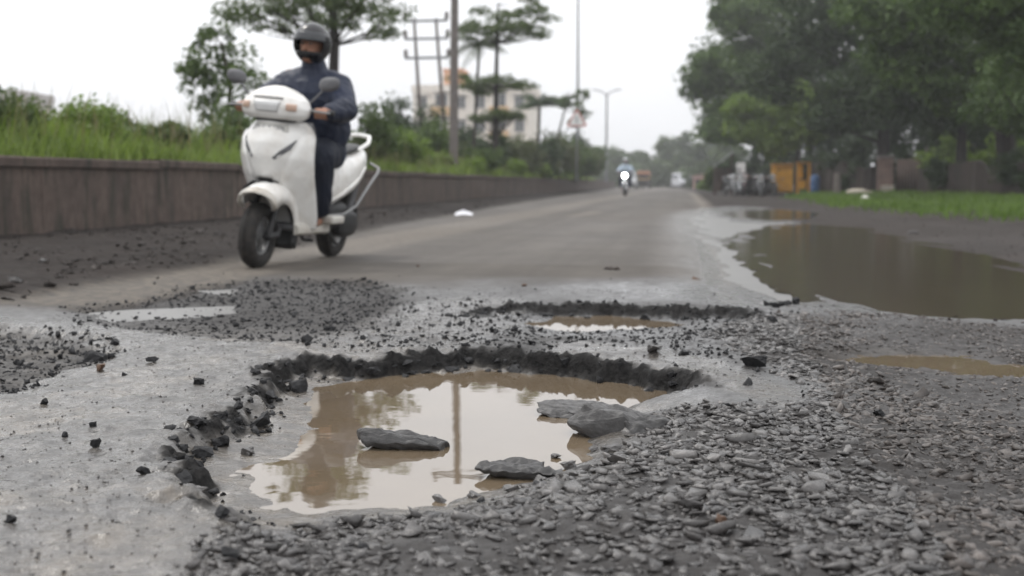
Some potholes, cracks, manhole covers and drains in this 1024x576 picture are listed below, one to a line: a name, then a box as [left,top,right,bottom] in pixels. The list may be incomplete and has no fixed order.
pothole [462,300,764,343]
pothole [811,348,1024,379]
pothole [0,323,137,395]
pothole [51,277,425,344]
pothole [161,346,755,558]
